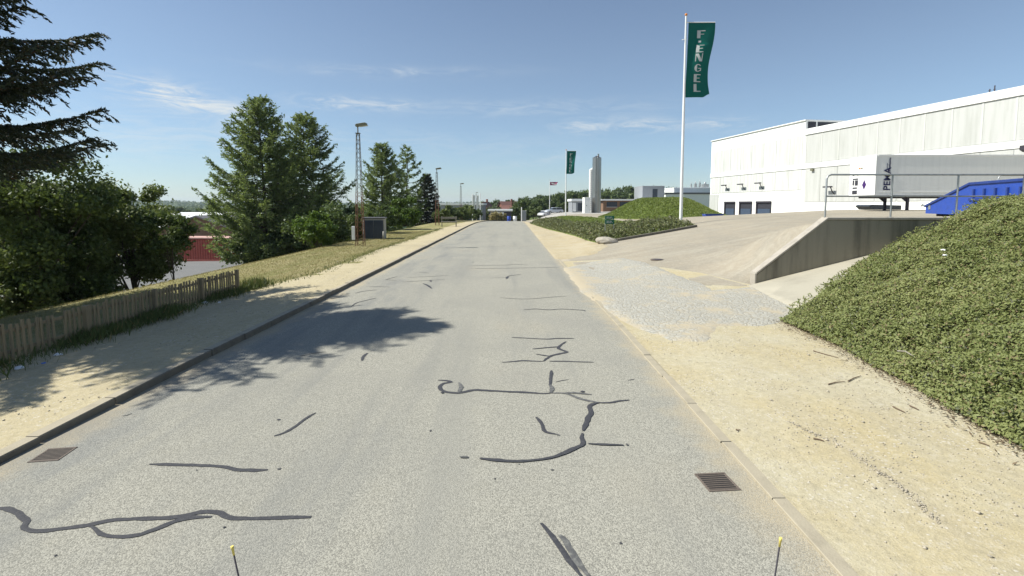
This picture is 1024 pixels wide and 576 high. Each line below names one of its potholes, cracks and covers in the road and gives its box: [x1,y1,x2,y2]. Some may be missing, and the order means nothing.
drain grate [27,447,78,463]
drain grate [694,472,741,492]
